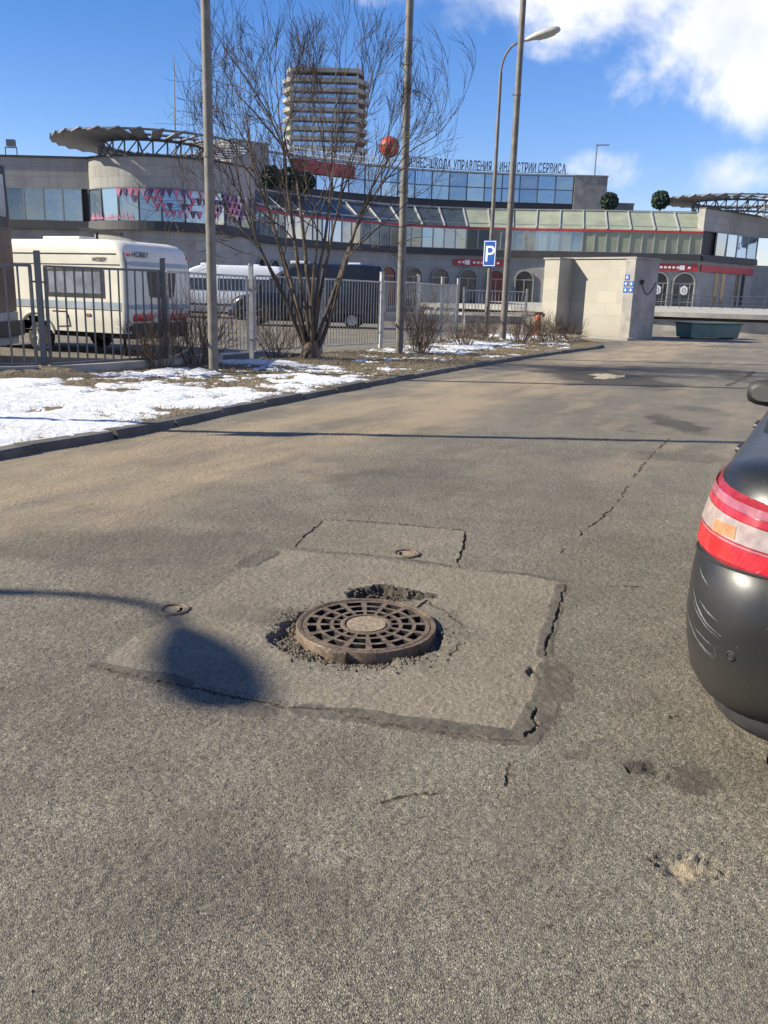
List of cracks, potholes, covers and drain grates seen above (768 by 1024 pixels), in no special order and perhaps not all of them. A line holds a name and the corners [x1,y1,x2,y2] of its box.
pothole [344,583,438,602]
utility cover [392,549,421,559]
manhole cover [296,598,436,665]
pothole [621,762,681,783]
utility cover [158,603,191,616]
crack [560,430,670,553]
crack [504,762,513,786]
crack [543,584,569,656]
crack [295,519,468,566]
pothole [644,843,734,887]
crack [380,791,439,804]
